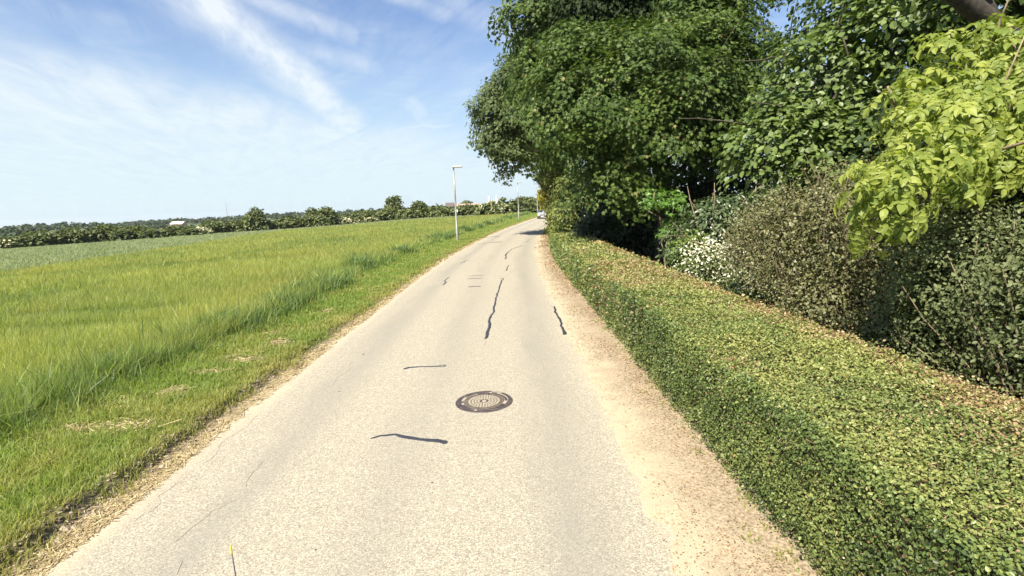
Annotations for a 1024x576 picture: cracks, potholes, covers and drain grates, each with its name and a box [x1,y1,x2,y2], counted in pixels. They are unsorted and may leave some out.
manhole cover [455,391,513,413]
crack [135,415,258,521]
